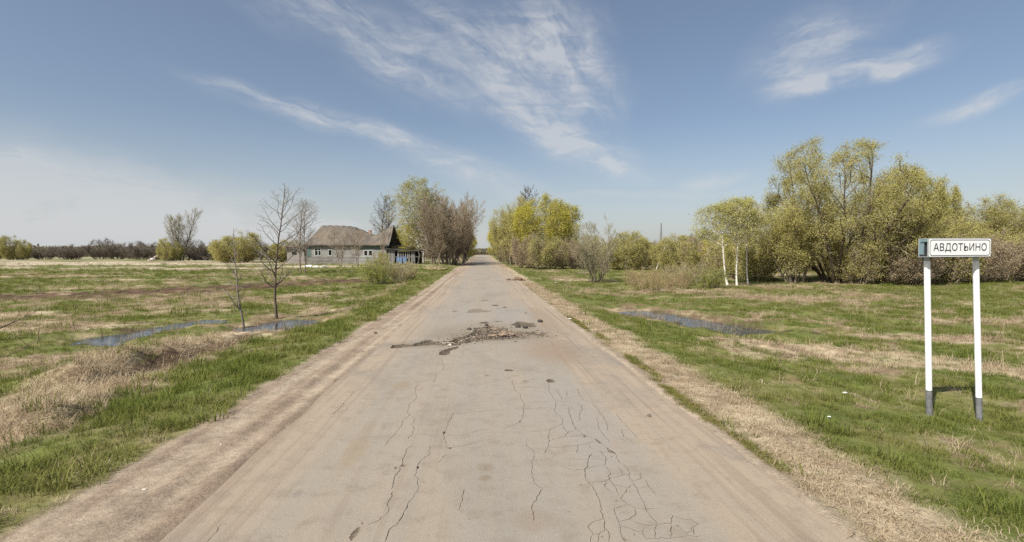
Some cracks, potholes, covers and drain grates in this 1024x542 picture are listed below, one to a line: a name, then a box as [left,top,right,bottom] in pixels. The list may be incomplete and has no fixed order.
pothole [426,325,558,348]
crack [368,382,533,541]
crack [533,383,701,541]
pothole [385,340,442,350]
